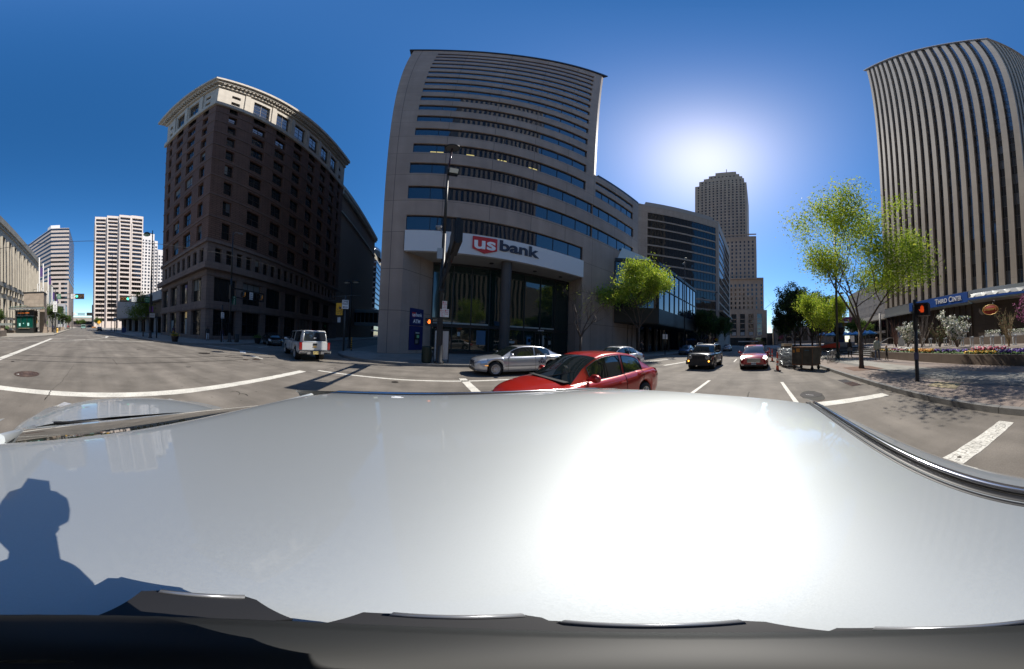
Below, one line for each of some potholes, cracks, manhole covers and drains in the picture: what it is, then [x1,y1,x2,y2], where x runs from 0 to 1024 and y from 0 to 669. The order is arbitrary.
manhole cover [800,391,825,401]
